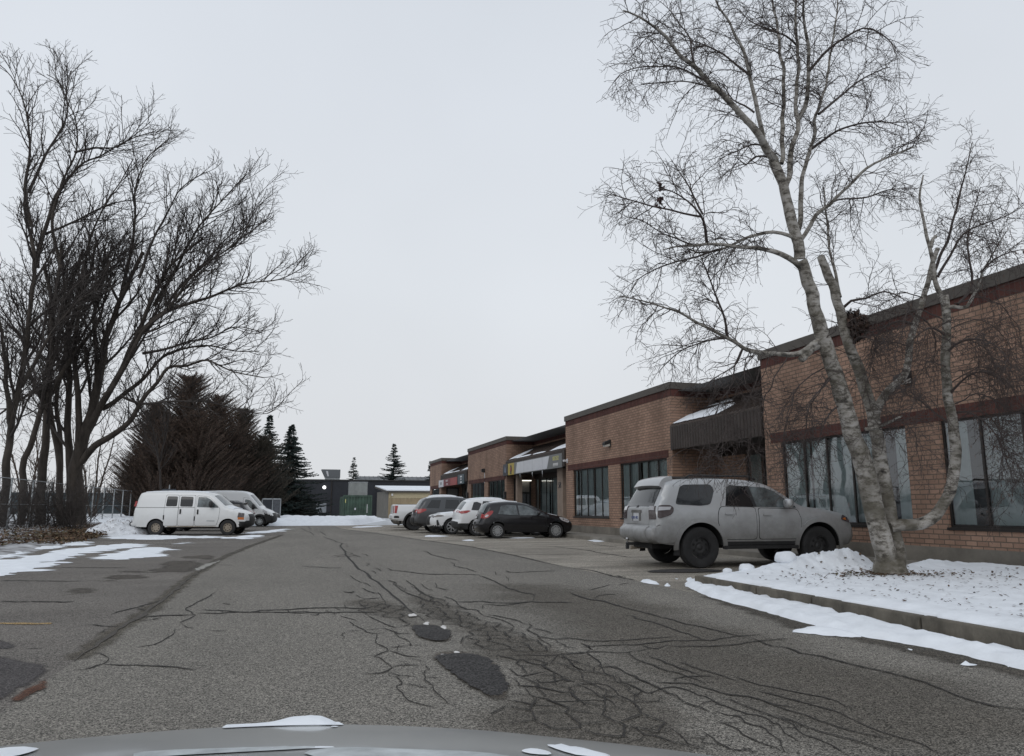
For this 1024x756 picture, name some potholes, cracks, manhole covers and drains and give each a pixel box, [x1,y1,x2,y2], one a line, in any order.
crack [88,526,1021,754]
